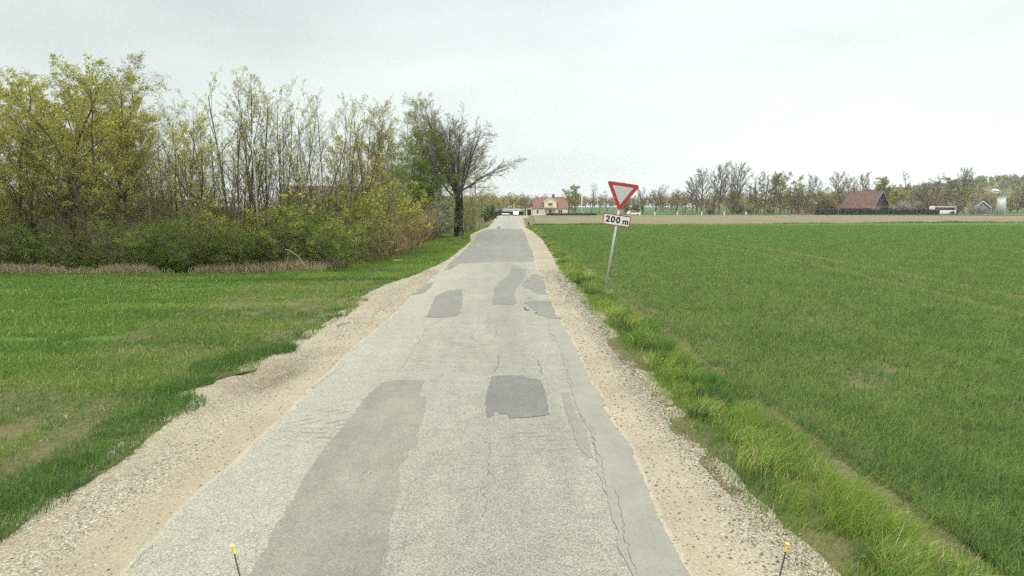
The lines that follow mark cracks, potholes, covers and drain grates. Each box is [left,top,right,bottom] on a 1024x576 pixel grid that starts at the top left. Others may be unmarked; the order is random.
crack [579,413,637,574]
crack [480,439,507,518]
